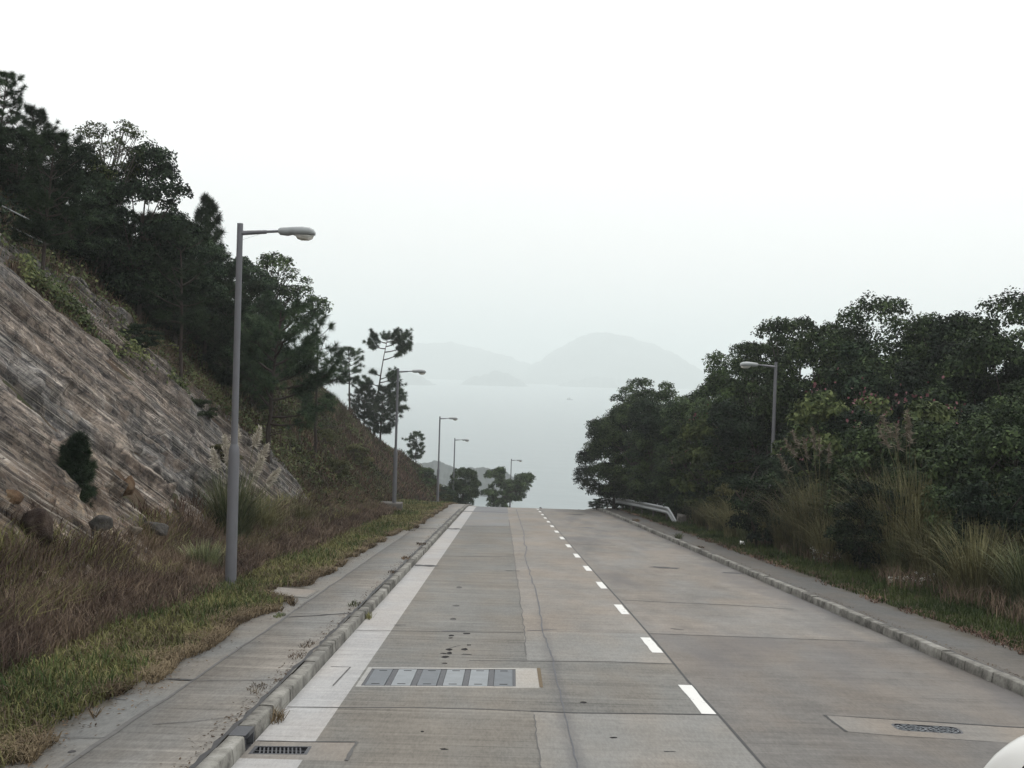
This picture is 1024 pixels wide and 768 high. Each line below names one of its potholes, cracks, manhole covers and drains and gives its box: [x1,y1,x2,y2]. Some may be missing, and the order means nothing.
manhole cover [361,668,543,687]
drain grate [248,746,312,755]
drain grate [228,726,254,751]
